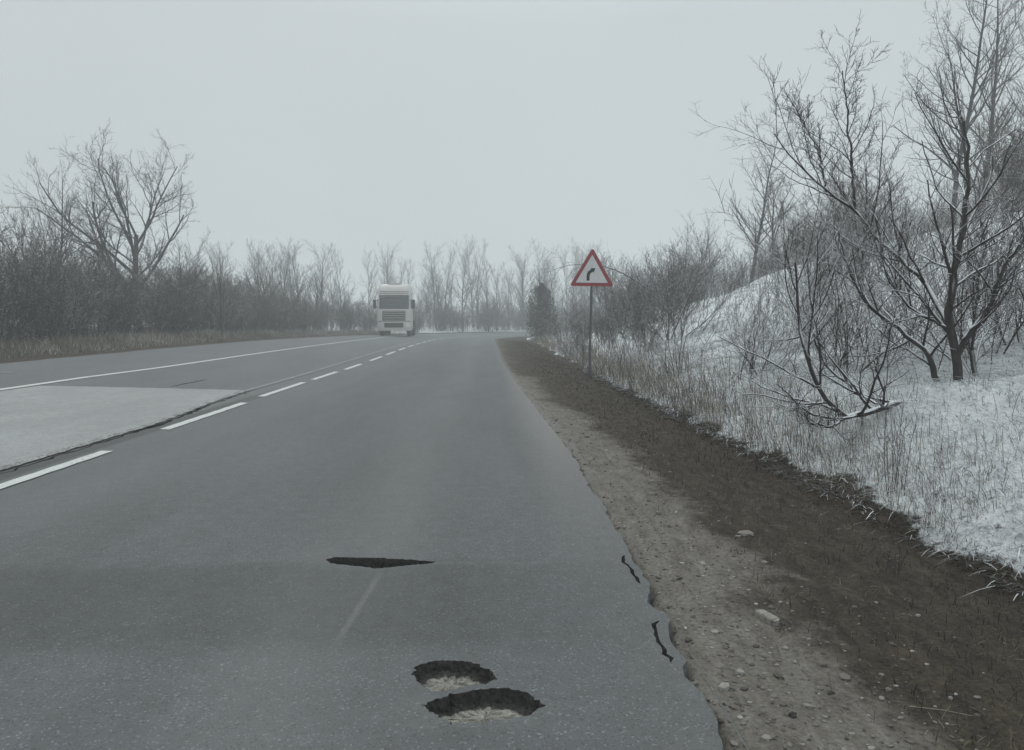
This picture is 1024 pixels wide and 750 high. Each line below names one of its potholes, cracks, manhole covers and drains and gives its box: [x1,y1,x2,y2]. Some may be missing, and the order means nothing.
crack [621,556,640,583]
pothole [410,660,497,692]
crack [651,621,673,662]
pothole [423,688,546,724]
pothole [326,557,436,569]
